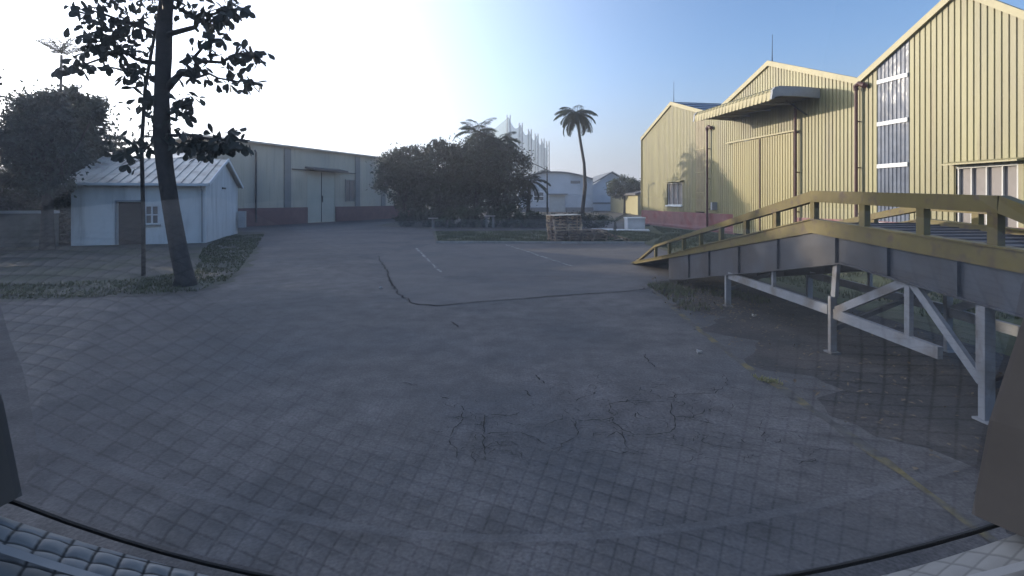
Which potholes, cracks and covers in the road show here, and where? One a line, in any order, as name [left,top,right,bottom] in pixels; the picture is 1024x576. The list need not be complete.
crack [379,256,645,306]
crack [546,370,839,464]
crack [415,396,563,468]
